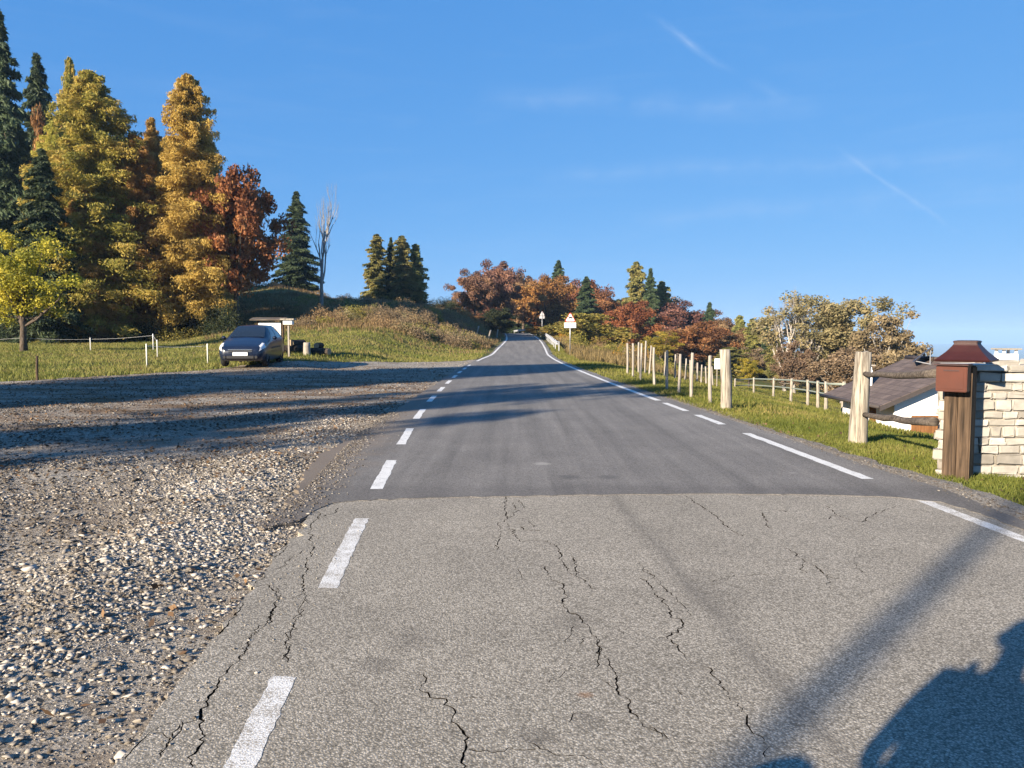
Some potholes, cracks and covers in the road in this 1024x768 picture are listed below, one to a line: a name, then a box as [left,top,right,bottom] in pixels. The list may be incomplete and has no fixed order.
crack [640,566,771,757]
crack [419,675,603,768]
crack [125,508,338,768]
crack [495,497,684,745]
